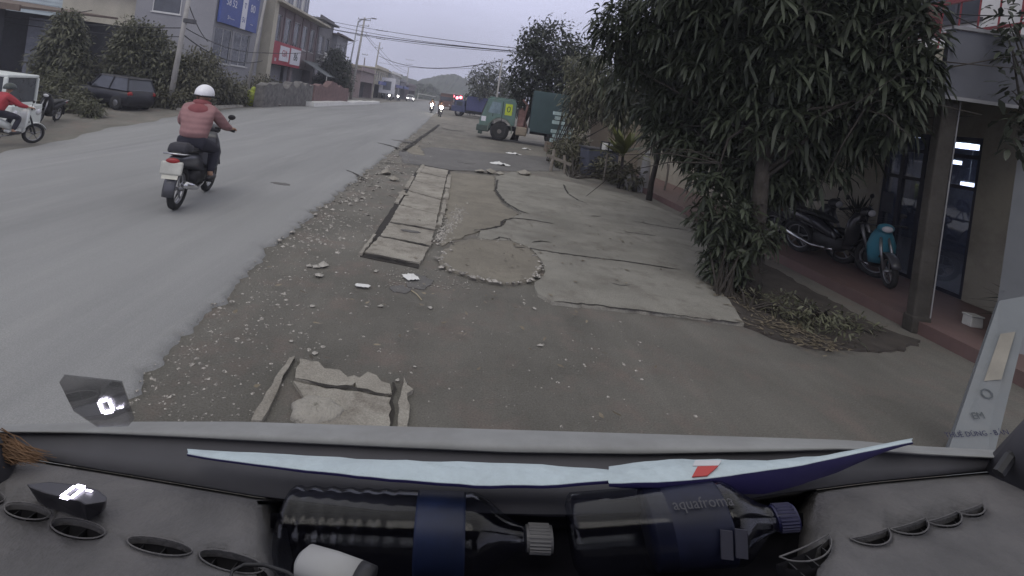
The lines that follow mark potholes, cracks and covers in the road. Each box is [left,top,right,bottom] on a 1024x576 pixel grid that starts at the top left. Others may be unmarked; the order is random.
crack [380,124,474,172]
crack [475,180,675,269]
crack [282,359,397,426]
